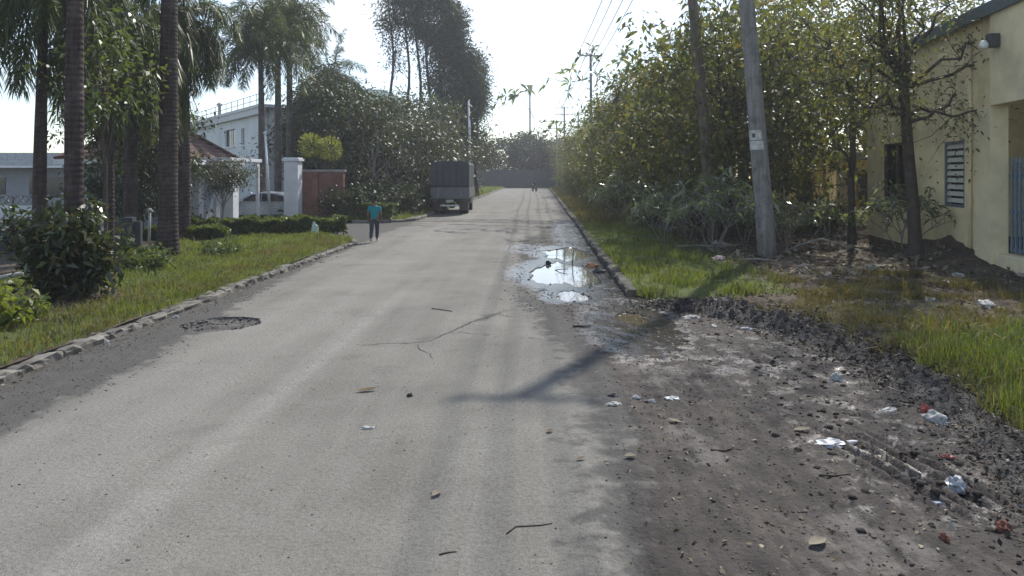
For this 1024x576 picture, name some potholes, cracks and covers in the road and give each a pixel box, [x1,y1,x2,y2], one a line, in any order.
pothole [527,262,601,288]
pothole [541,247,594,262]
pothole [179,317,261,332]
crack [373,311,515,359]
pothole [556,291,590,302]
